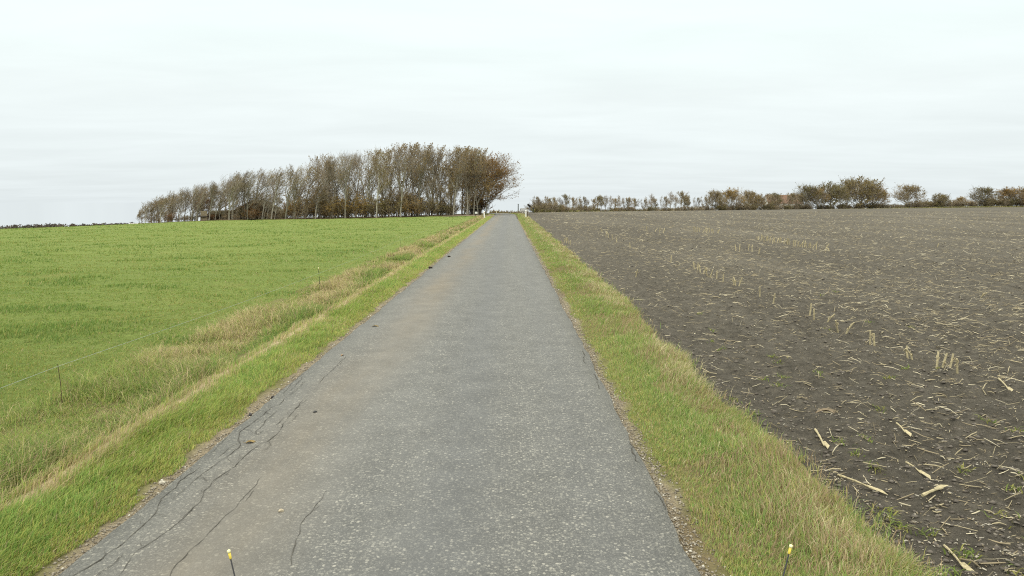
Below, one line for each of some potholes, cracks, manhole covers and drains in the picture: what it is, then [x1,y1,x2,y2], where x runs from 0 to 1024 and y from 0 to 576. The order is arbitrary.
crack [74,377,307,576]
